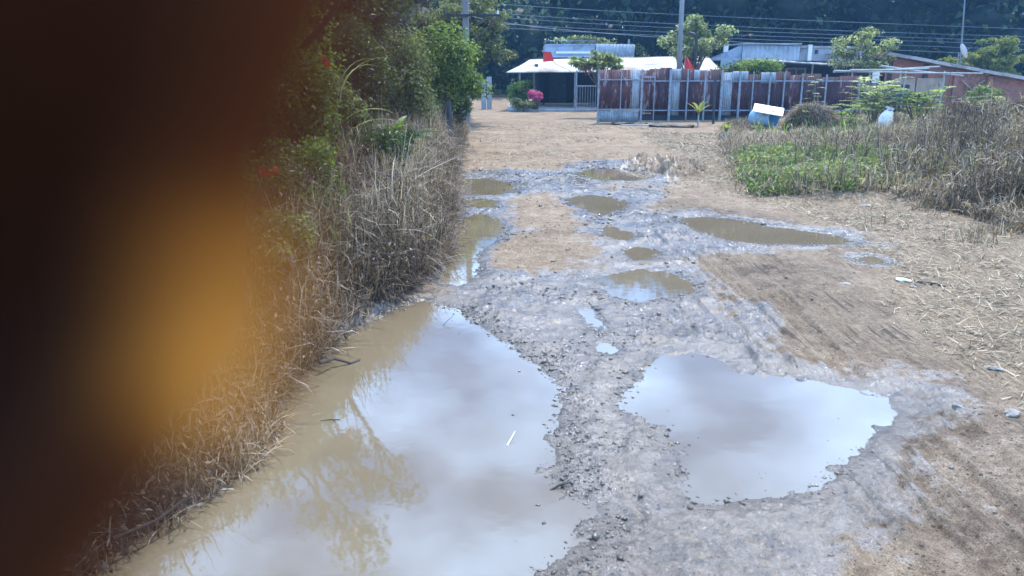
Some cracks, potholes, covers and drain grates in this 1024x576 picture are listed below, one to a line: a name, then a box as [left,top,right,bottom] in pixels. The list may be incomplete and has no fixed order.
pothole [609,240,673,262]
pothole [584,262,713,304]
pothole [431,210,517,289]
pothole [458,174,525,196]
pothole [579,335,637,360]
pothole [839,252,901,267]
pothole [668,213,866,246]
pothole [118,291,624,576]
pothole [555,192,640,216]
pothole [567,165,661,181]
pothole [600,343,924,513]
pothole [590,221,652,241]
